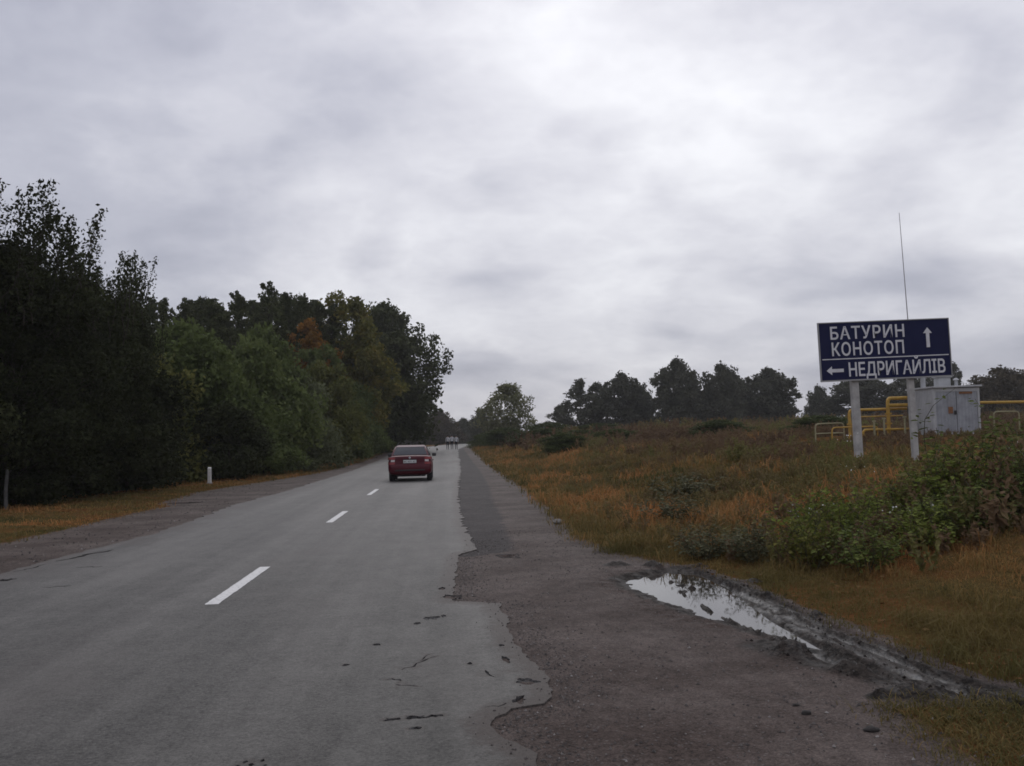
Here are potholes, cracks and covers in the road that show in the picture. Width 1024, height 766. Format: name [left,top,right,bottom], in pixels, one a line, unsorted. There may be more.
crack [14,550,111,572]
crack [386,654,436,686]
